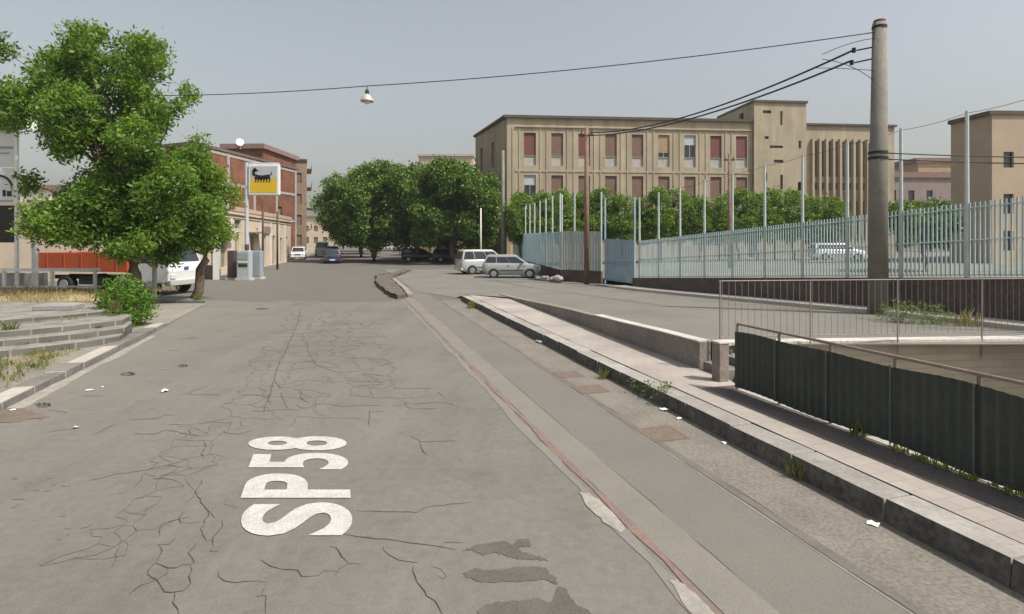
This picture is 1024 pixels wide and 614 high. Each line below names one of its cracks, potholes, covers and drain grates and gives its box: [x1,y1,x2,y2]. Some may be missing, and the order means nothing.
crack [40,418,251,566]
crack [207,313,456,426]
crack [218,534,463,613]
crack [356,502,468,513]
manhole cover [570,384,610,394]
crack [129,478,233,614]
manhole cover [634,426,690,443]
